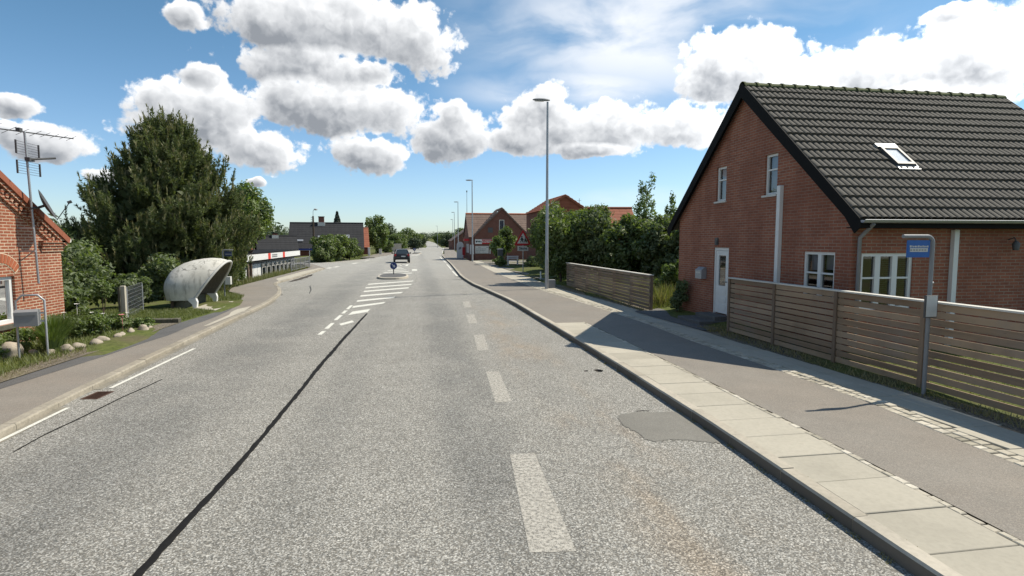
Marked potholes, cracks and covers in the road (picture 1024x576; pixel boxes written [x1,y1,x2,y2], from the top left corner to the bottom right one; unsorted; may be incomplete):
drain grate [79,391,114,400]
